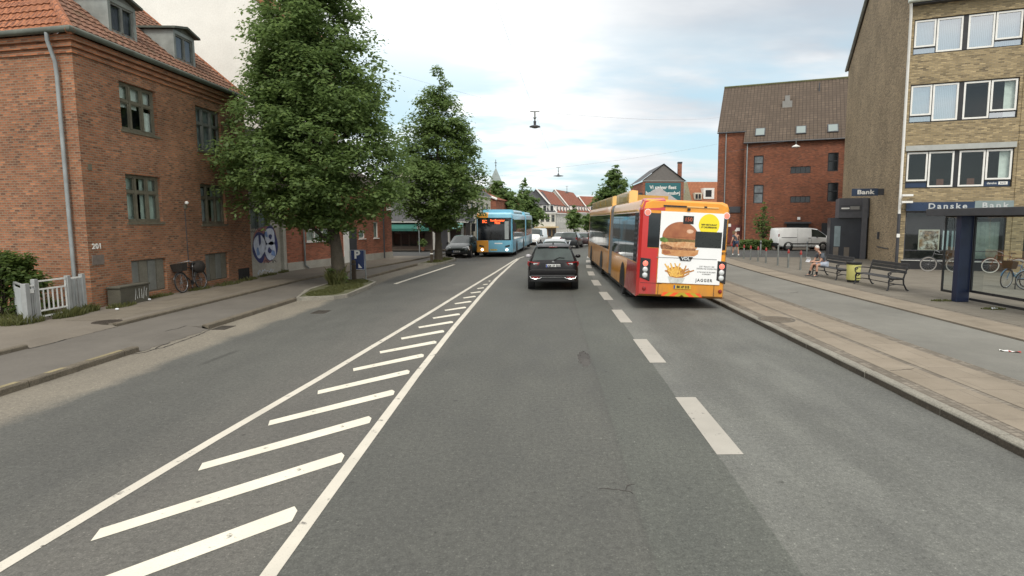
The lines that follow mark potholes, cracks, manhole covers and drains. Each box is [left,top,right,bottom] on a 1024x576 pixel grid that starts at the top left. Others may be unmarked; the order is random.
pothole [577,351,591,367]
manhole cover [758,316,796,324]
